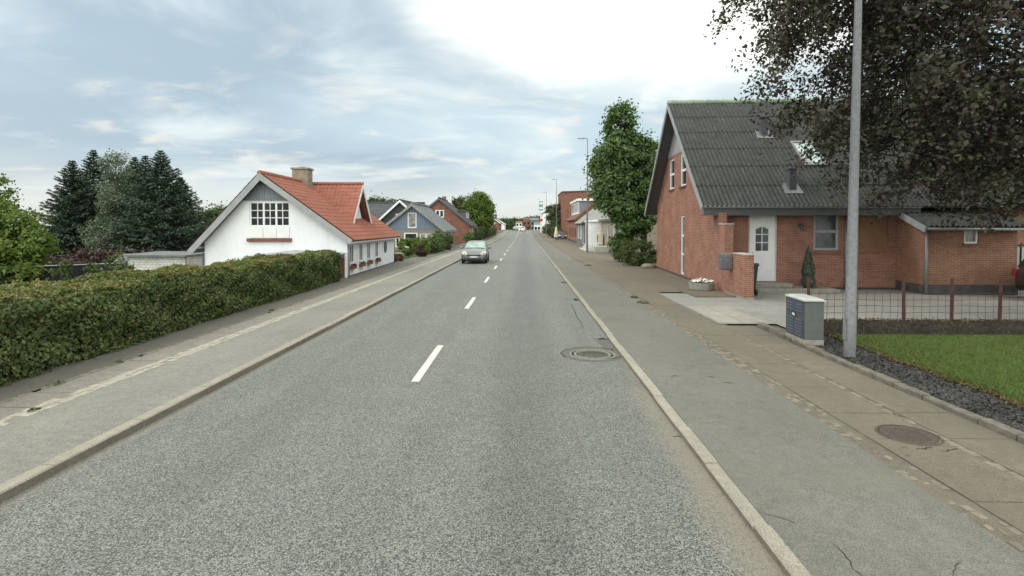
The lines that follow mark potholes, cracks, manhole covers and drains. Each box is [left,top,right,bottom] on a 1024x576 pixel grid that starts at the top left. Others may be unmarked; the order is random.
manhole cover [569,349,616,360]
manhole cover [875,424,944,446]
